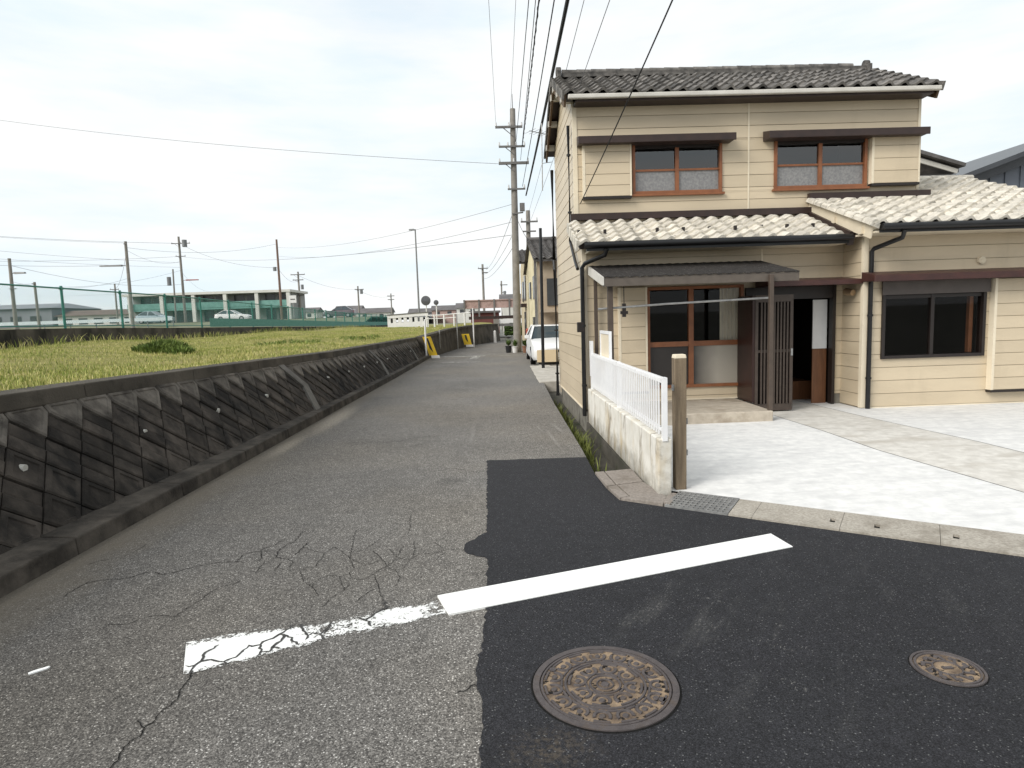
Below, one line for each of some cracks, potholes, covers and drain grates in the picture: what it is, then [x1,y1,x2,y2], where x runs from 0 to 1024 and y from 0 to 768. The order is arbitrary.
drain grate [665,491,740,516]
manhole cover [531,646,682,734]
crack [108,671,192,768]
crack [63,520,462,625]
manhole cover [908,650,990,688]
